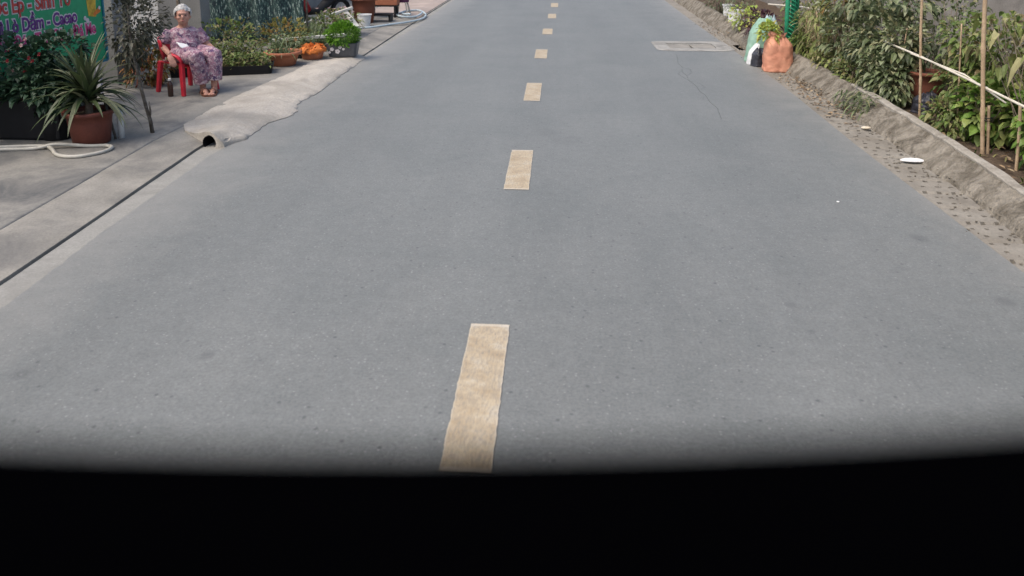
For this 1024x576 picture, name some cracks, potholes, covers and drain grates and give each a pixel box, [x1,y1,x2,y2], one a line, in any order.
manhole cover [651,41,734,51]
